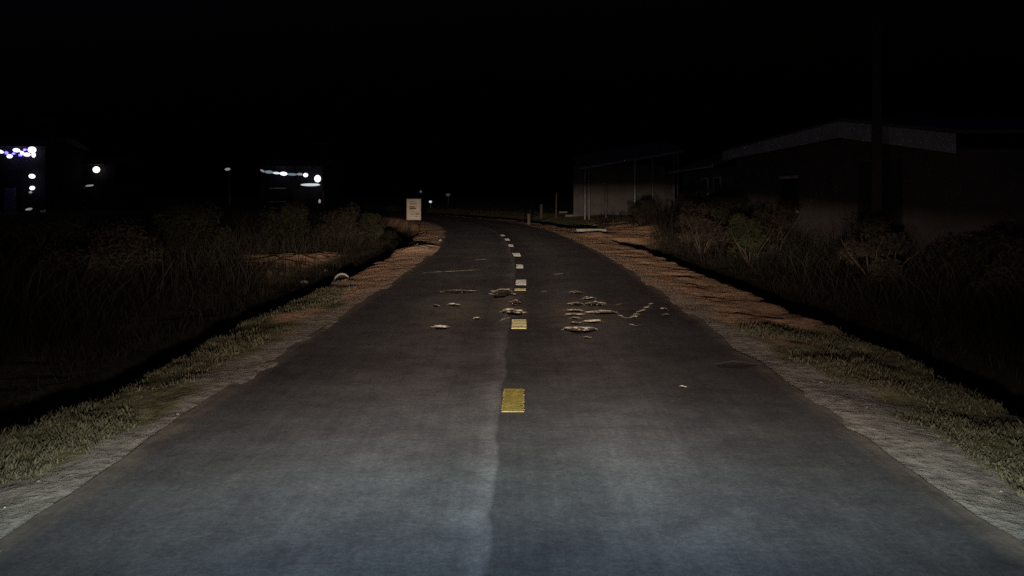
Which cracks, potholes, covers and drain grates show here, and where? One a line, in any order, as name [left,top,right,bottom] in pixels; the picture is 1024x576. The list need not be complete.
pothole [498,308,527,316]
pothole [489,289,516,298]
